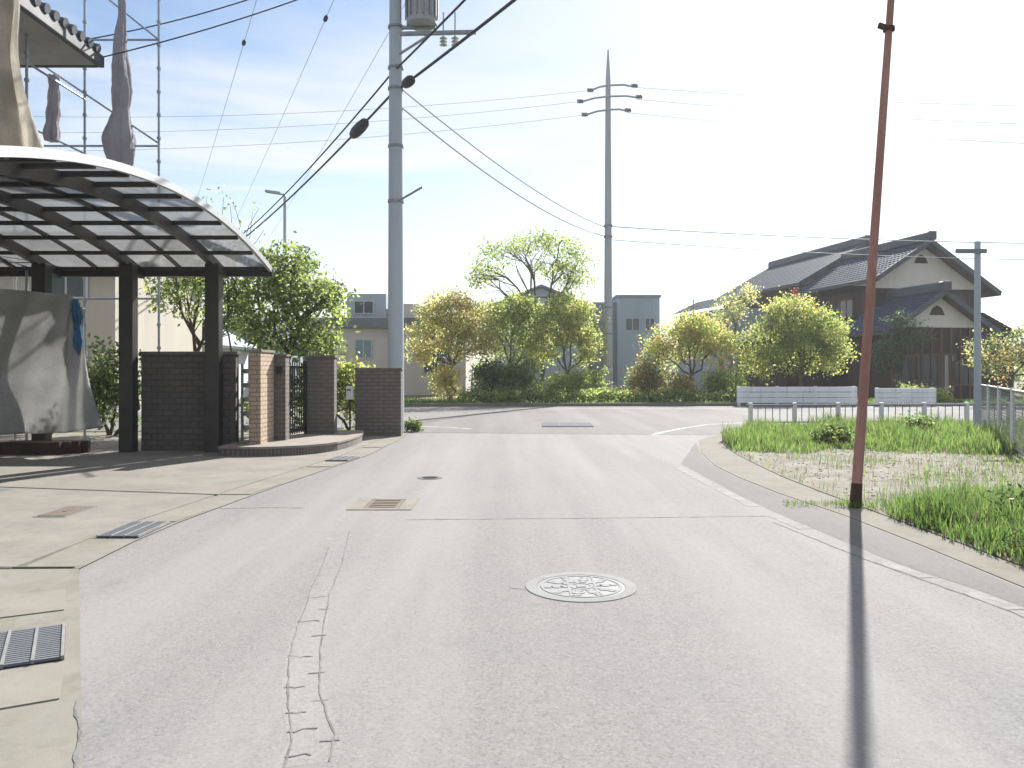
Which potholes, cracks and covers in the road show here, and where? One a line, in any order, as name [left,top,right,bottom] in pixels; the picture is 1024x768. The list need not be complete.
drain grate [0,622,66,670]
manhole cover [526,572,637,603]
crack [283,531,350,768]
crack [73,699,83,768]
drain grate [96,521,171,538]
